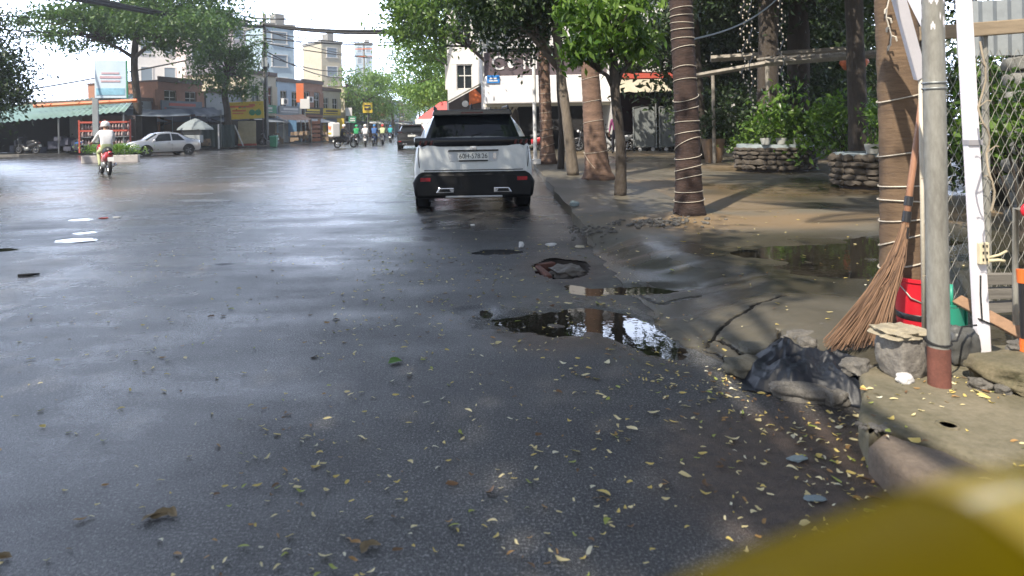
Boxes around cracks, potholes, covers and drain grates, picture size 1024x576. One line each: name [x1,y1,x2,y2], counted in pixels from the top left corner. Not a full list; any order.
pothole [935,420,960,431]
crack [638,295,784,358]
pothole [532,258,591,279]
